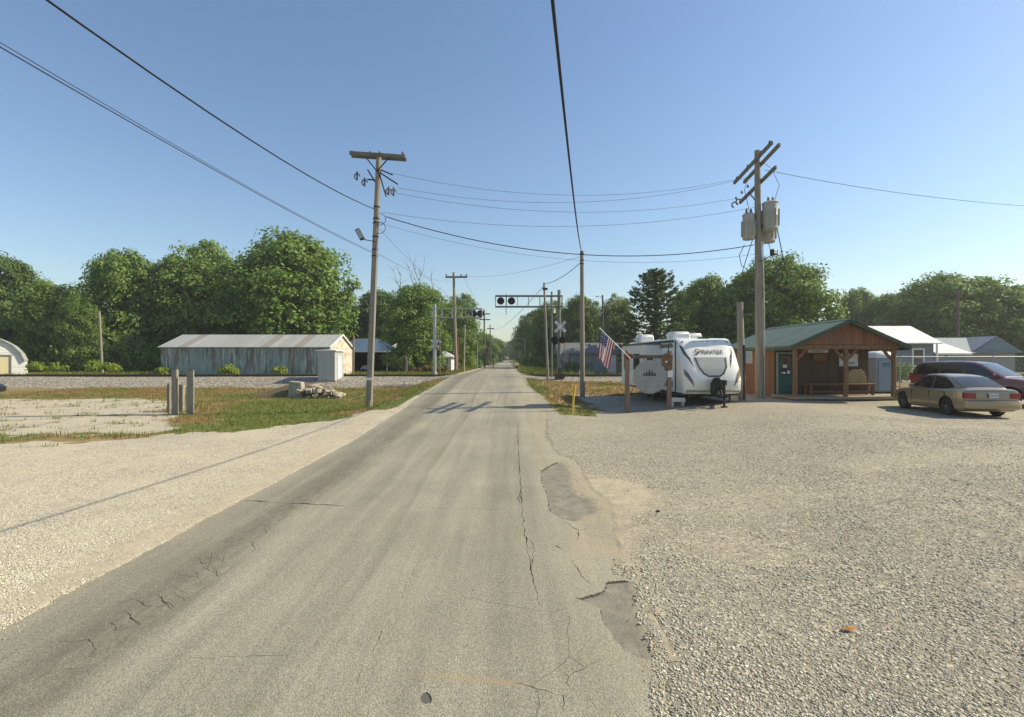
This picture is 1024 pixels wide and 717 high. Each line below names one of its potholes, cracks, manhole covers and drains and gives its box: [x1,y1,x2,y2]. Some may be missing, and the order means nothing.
crack [41,524,270,686]
crack [258,501,500,510]
pothole [421,692,432,704]
pothole [577,580,679,662]
crack [517,430,539,604]
crack [463,596,597,712]
